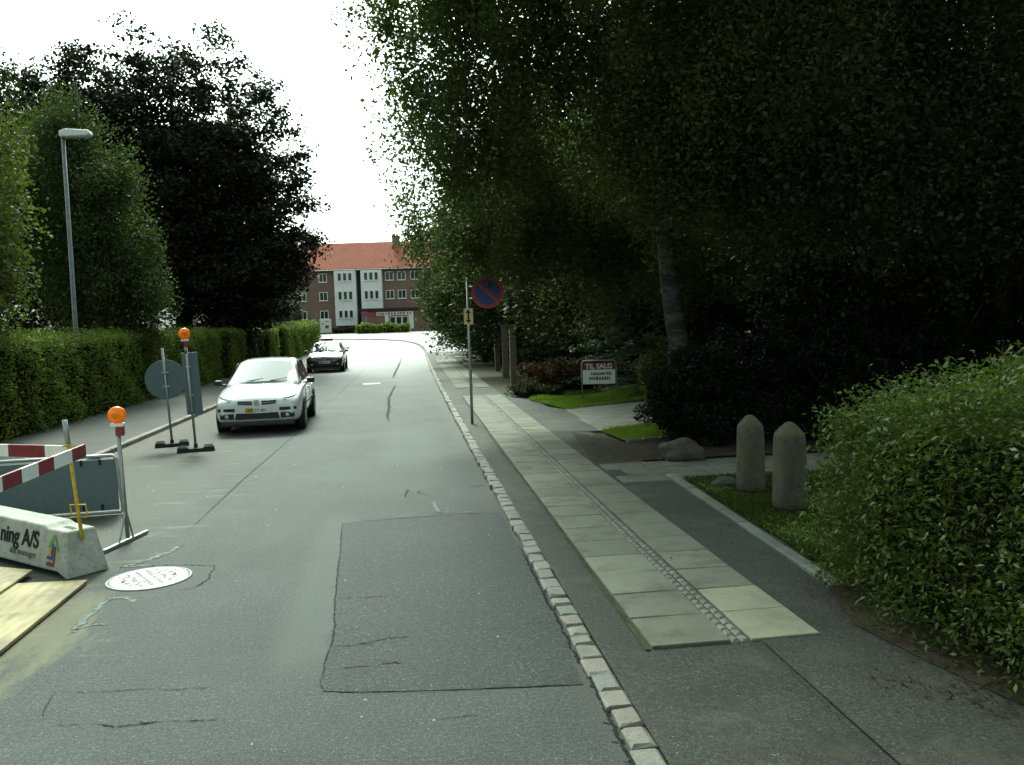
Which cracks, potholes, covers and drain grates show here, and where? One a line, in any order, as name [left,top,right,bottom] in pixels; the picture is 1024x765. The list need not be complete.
crack [386,360,450,421]
manhole cover [104,566,193,591]
crack [71,718,220,727]
crack [43,687,210,716]
